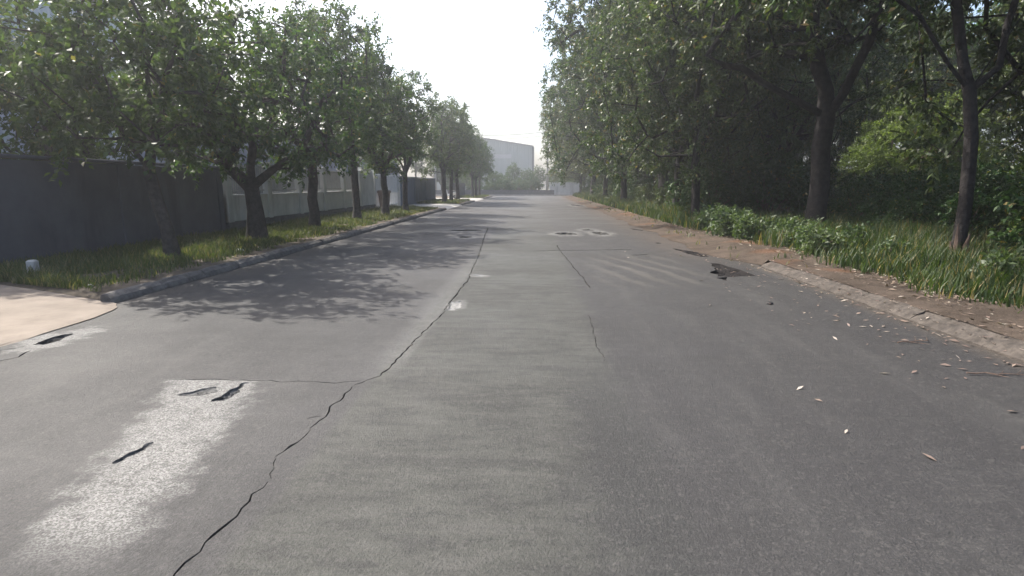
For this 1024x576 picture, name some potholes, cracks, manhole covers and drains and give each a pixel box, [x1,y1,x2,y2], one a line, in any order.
crack [169,228,488,576]
pothole [34,334,73,345]
pothole [112,442,154,464]
pothole [710,263,755,277]
pothole [211,382,249,402]
pothole [178,387,217,396]
